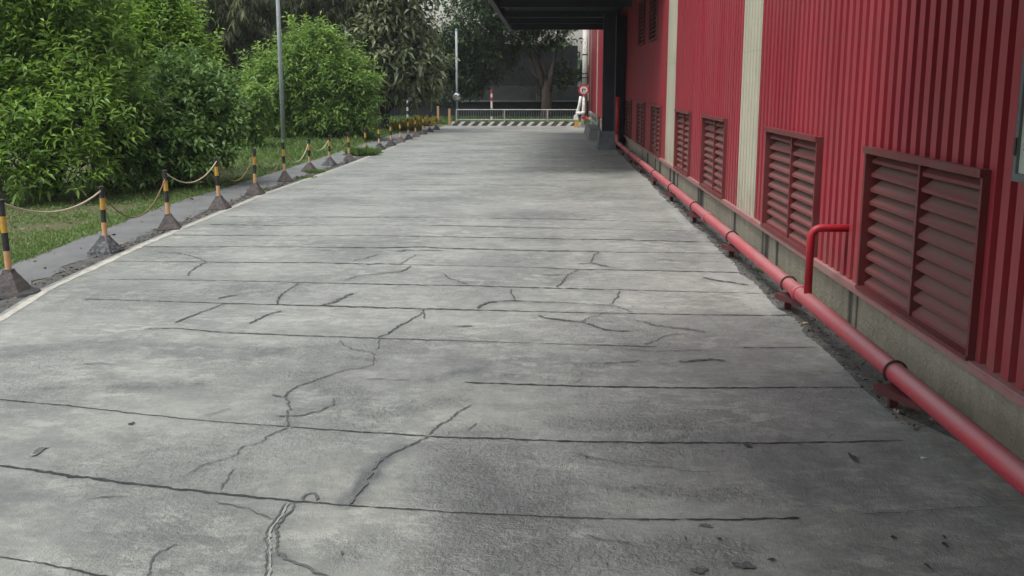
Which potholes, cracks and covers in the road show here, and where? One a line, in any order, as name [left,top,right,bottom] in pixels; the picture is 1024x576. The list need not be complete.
crack [249,283,298,323]
crack [477,250,726,363]
crack [349,404,477,504]
crack [184,309,425,576]
